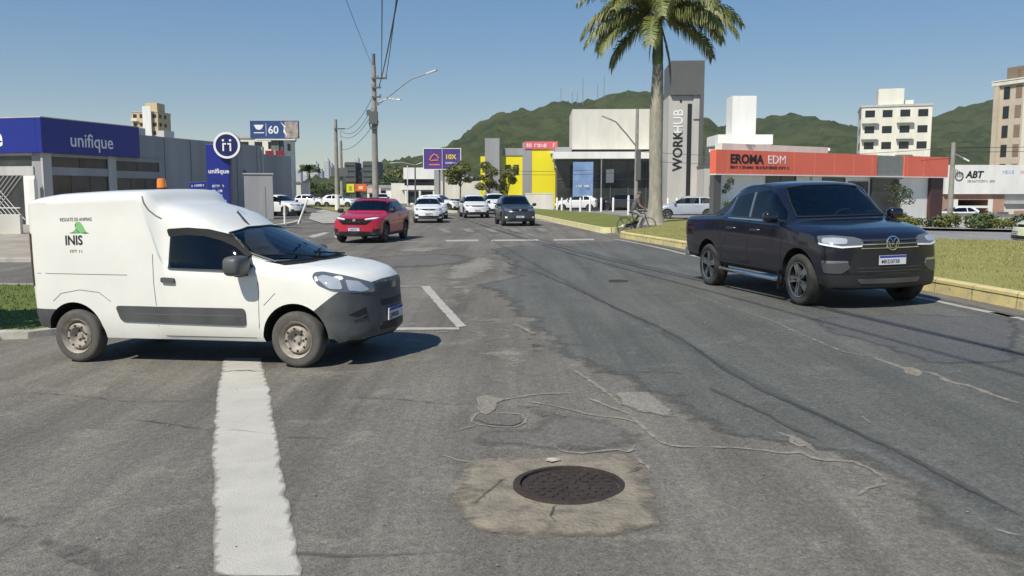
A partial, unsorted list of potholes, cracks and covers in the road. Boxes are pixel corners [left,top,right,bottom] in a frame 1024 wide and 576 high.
manhole cover [513,466,625,505]
crack [804,335,1018,403]
crack [359,371,886,494]
